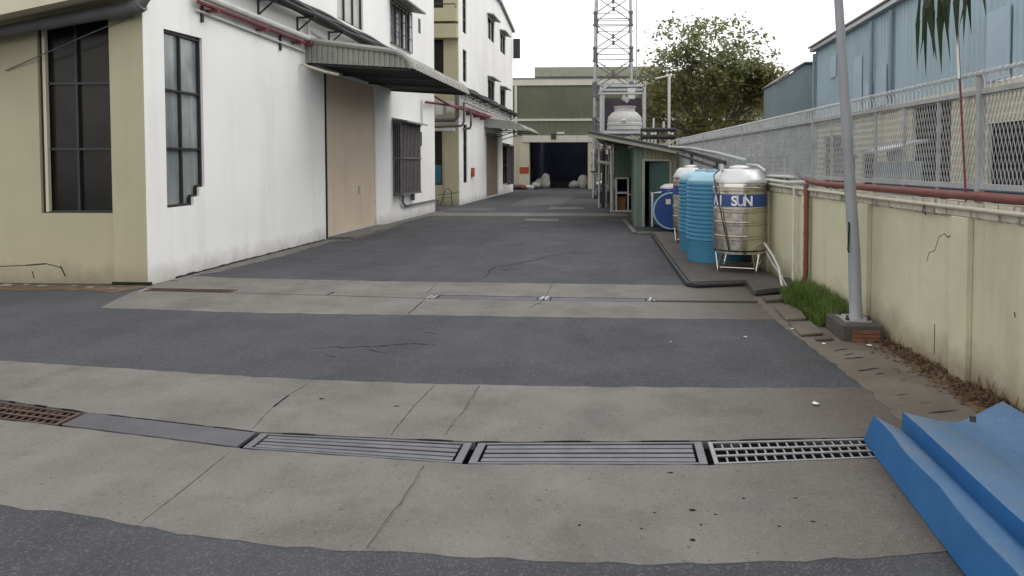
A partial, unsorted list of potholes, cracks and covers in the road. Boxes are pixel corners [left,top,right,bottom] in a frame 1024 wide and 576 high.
crack [307,332,435,357]
drain grate [0,402,82,426]
crack [253,385,306,428]
crack [390,386,434,436]
crack [142,451,231,522]
drain grate [708,438,877,465]
crack [485,252,593,277]
